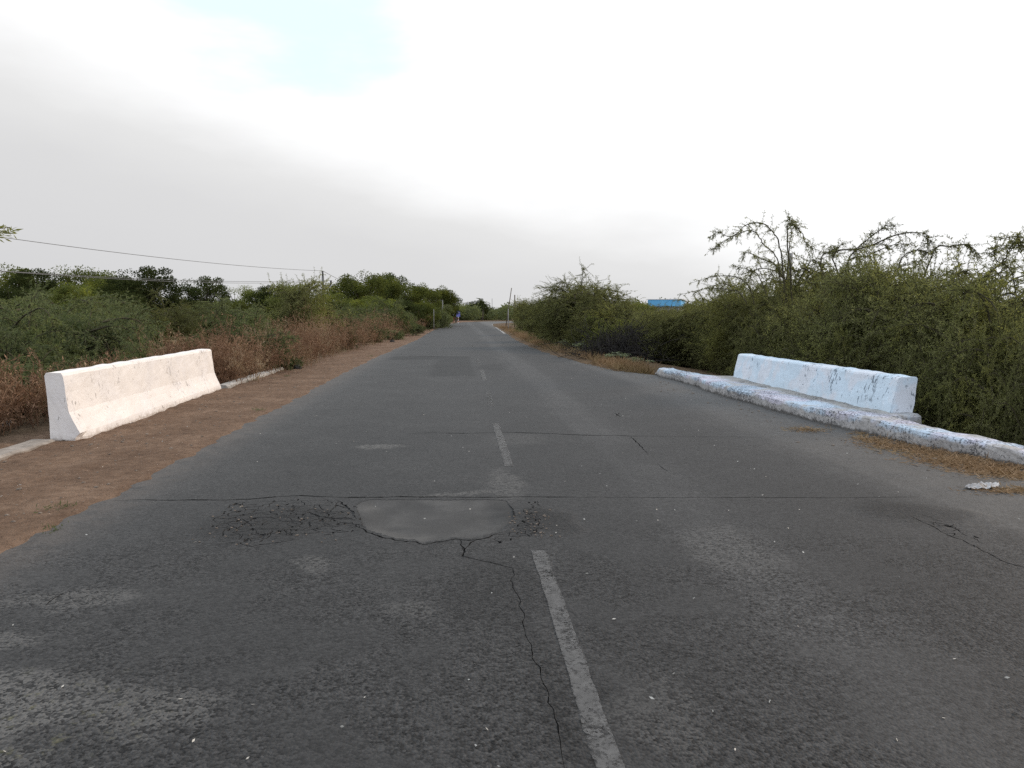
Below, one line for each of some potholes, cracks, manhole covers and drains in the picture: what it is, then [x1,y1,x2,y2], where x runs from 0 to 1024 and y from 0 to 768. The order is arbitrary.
crack [114,495,867,768]
crack [913,515,1022,567]
crack [463,432,761,474]
